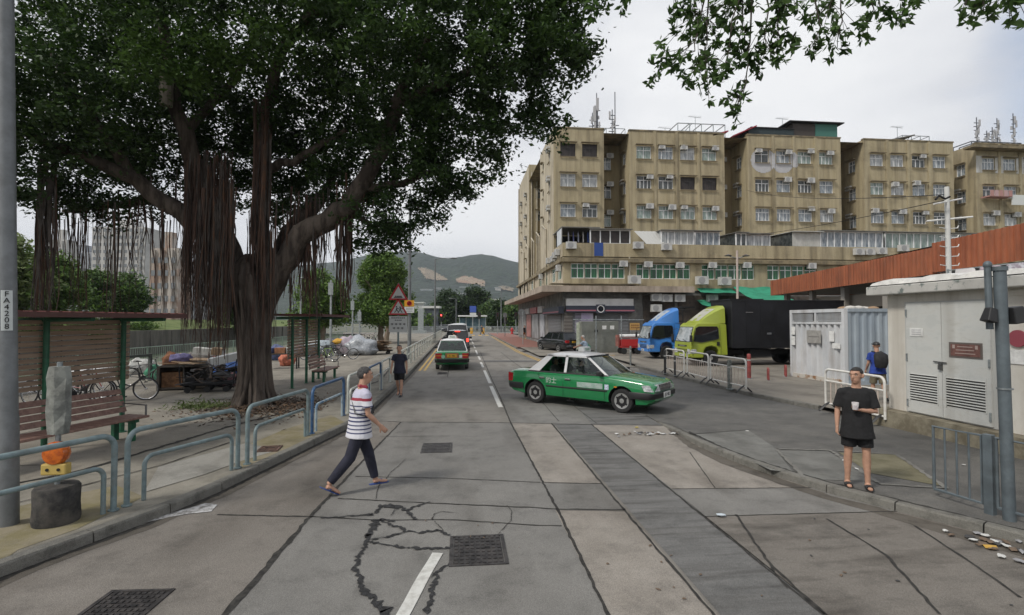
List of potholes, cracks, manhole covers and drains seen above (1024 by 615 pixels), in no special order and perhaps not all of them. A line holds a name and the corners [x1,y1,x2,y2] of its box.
manhole cover [449,534,509,567]
manhole cover [420,442,452,453]
